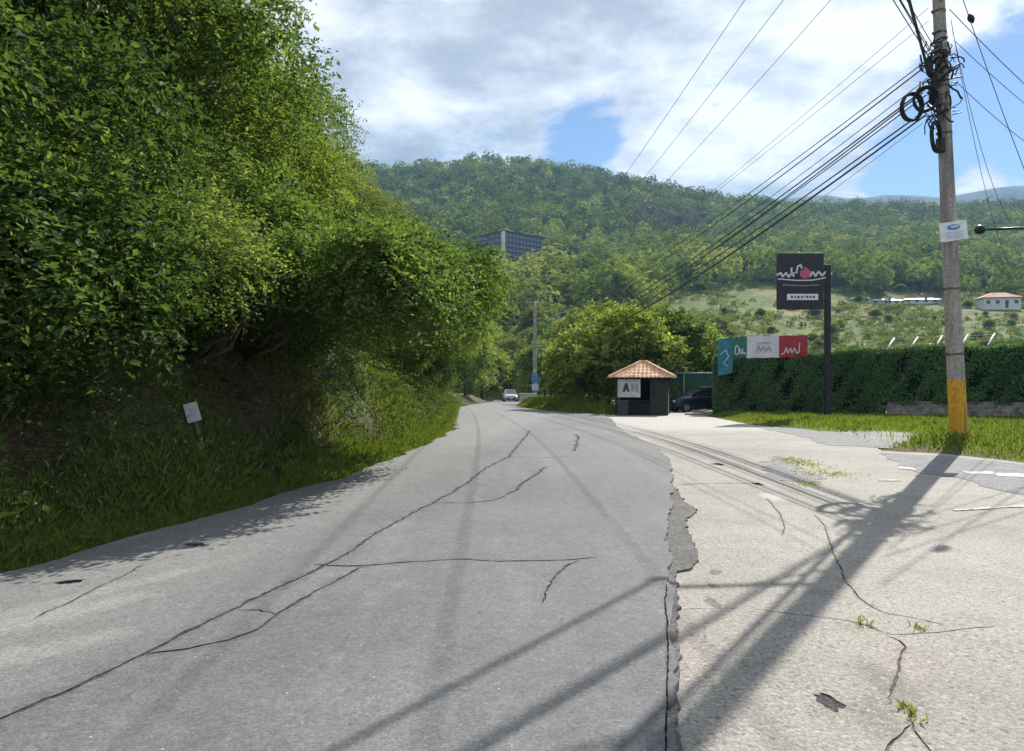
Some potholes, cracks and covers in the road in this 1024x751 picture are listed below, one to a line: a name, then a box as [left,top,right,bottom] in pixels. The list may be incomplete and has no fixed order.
crack [758,517,994,751]
crack [37,564,143,617]
crack [314,557,597,603]
crack [443,457,550,503]
pothole [813,693,846,712]
